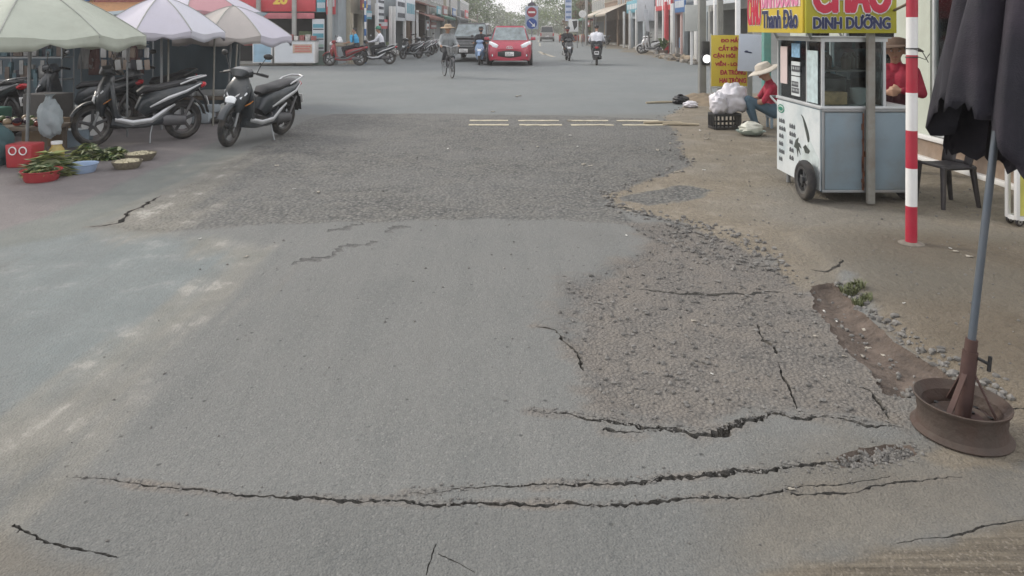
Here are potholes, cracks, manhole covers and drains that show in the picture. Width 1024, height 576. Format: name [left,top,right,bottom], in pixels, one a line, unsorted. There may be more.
pothole [809,283,953,398]
crack [535,324,902,439]
crack [93,196,160,227]
crack [899,520,1023,543]
crack [810,260,844,272]
pothole [836,444,917,468]
crack [73,461,961,508]
crack [13,525,117,558]
crack [426,544,475,575]
